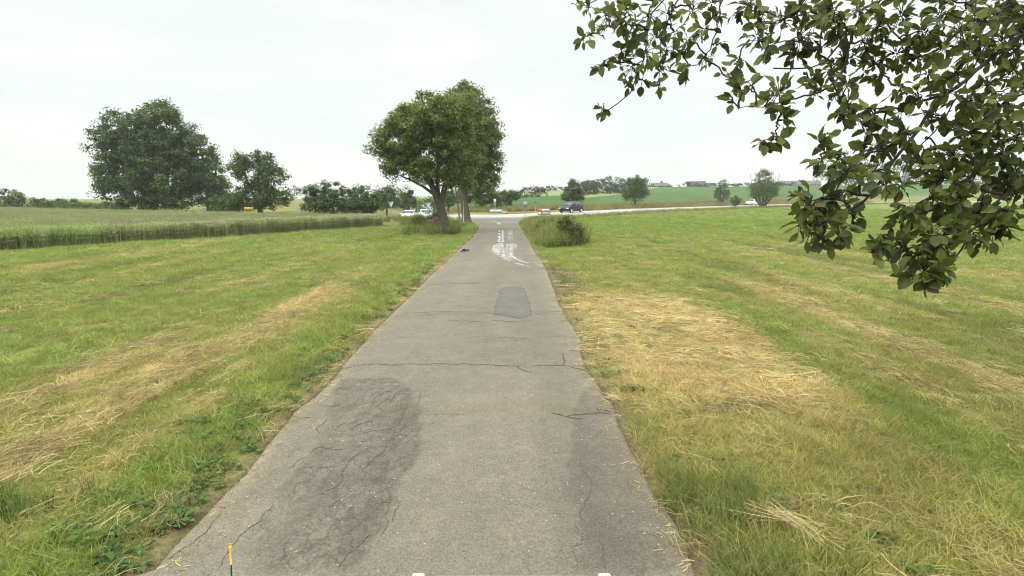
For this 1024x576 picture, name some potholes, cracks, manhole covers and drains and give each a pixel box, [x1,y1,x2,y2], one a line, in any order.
crack [217,503,273,570]
crack [349,311,587,372]
crack [559,462,592,565]
crack [282,378,420,568]
